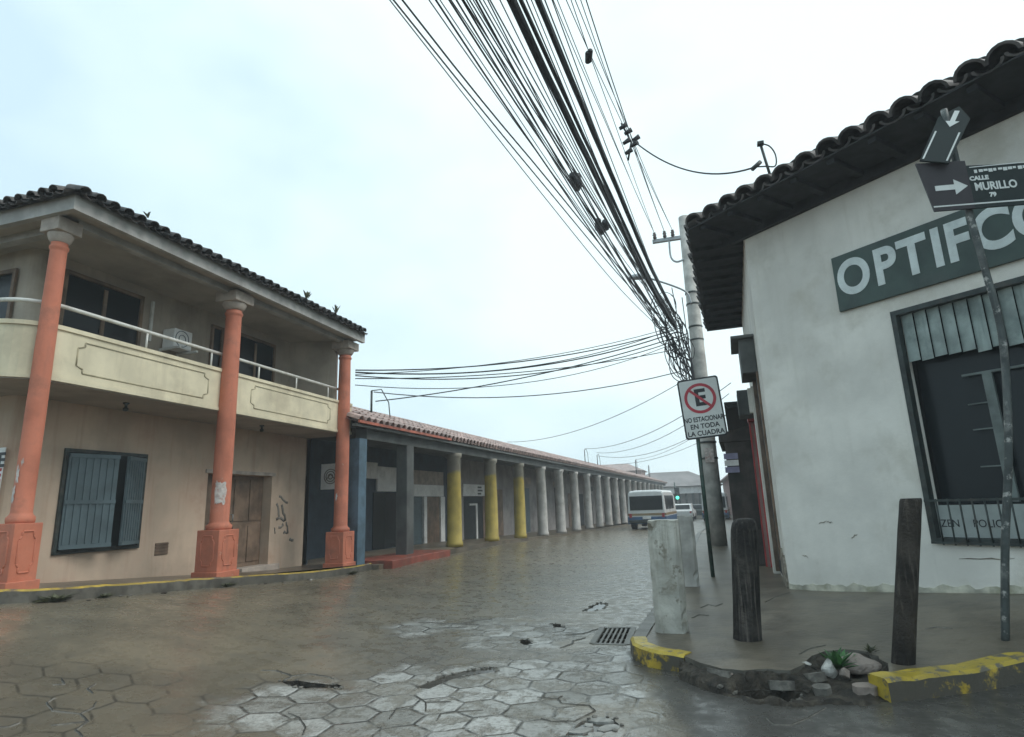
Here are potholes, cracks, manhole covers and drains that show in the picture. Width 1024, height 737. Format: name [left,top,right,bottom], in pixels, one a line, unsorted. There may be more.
pothole [415,666,500,689]
drain grate [589,626,636,645]
pothole [582,602,608,611]
pothole [278,679,344,689]
crack [560,628,599,648]
